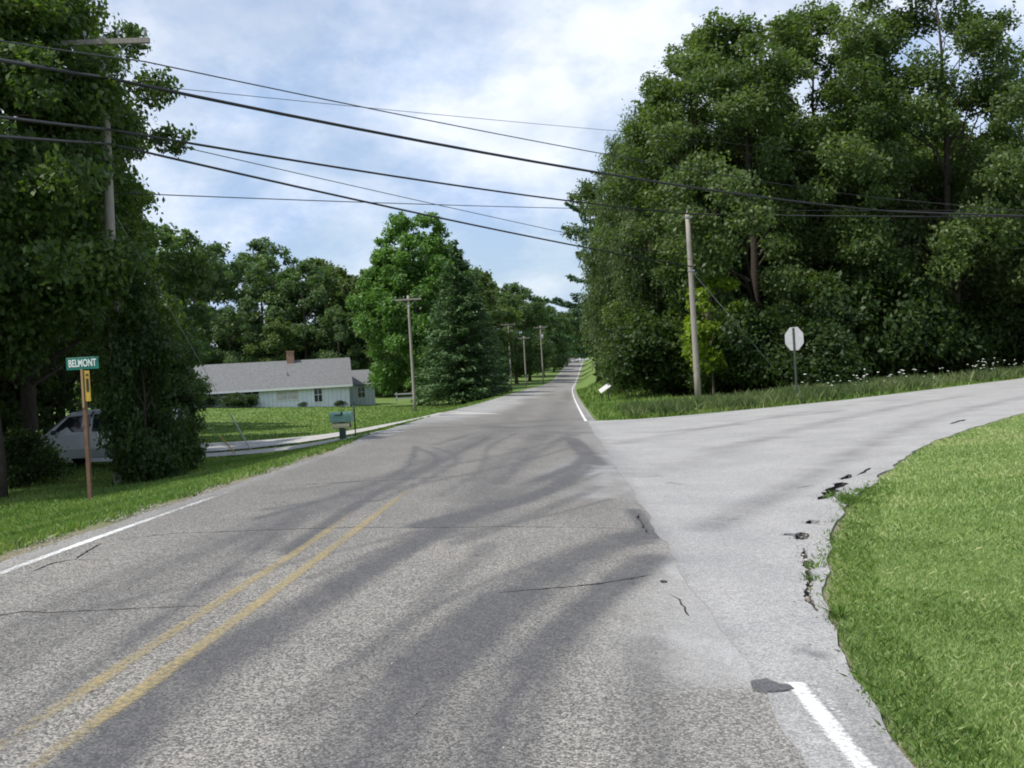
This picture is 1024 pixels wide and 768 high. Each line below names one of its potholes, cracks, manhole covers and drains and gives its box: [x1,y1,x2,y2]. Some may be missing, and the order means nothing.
pothole [817,482,847,500]
crack [113,516,650,541]
crack [0,605,218,616]
crack [34,543,102,571]
crack [500,575,648,593]
